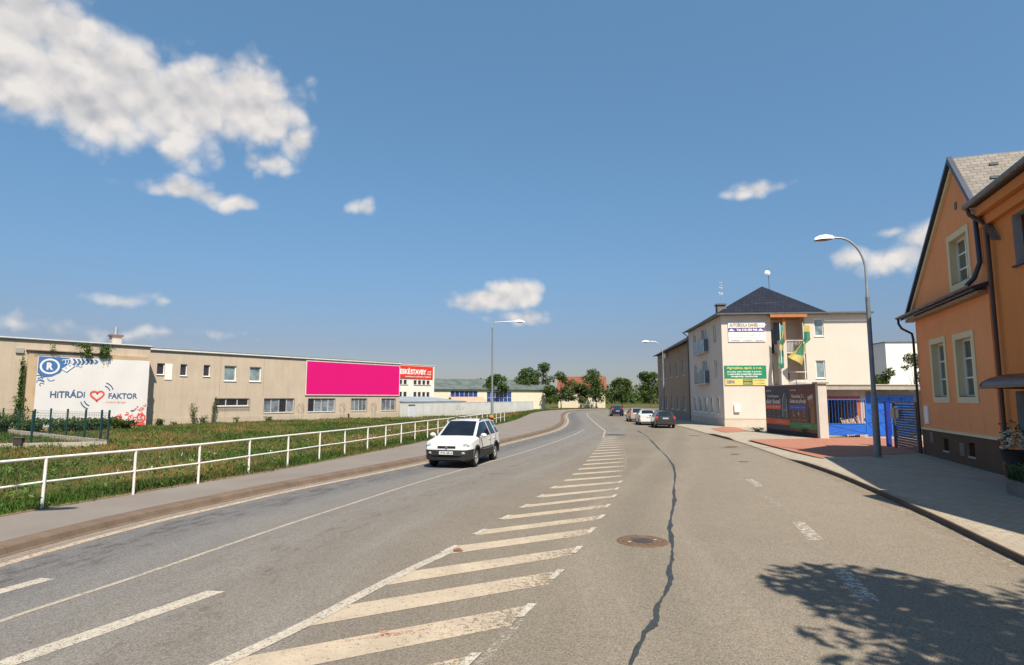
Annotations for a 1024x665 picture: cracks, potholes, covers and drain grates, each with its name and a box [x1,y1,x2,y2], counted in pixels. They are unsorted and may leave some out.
manhole cover [617,535,669,548]
